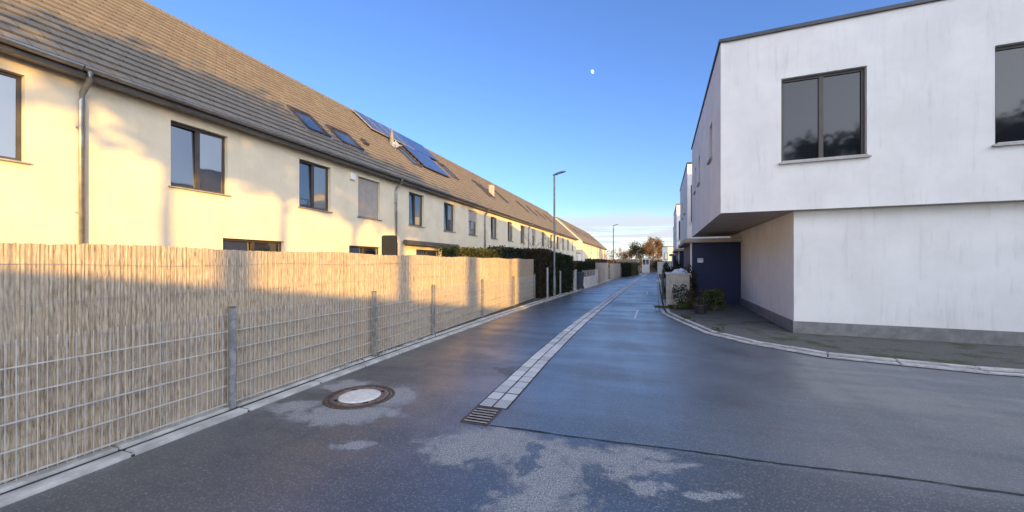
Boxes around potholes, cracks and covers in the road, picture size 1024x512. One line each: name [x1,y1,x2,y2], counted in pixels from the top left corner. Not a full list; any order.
manhole cover [322,385,395,410]
drain grate [460,406,502,426]
